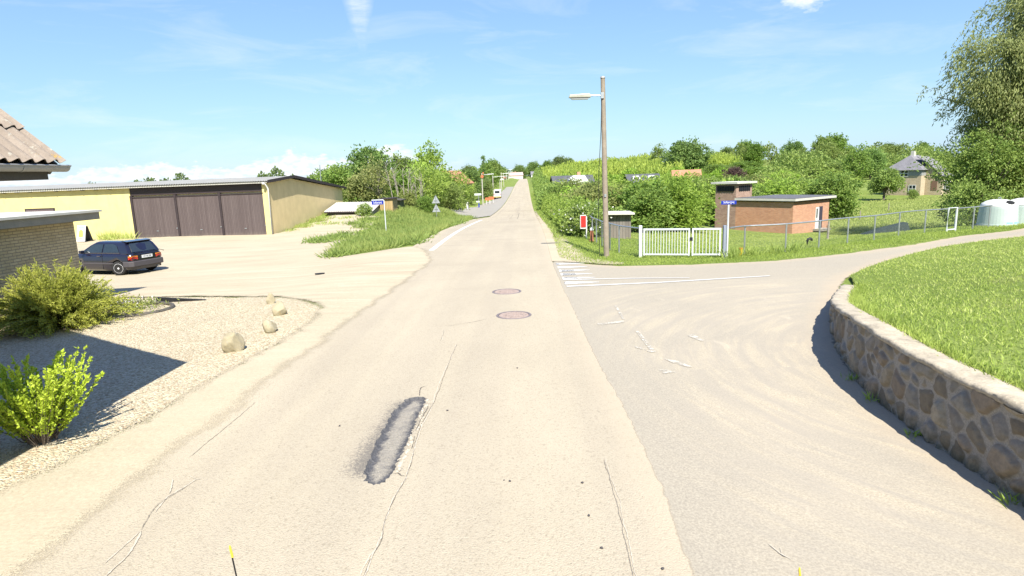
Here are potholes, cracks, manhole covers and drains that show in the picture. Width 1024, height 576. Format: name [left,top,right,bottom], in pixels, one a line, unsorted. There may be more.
crack [359,320,480,576]
crack [105,476,196,576]
crack [604,459,637,576]
manhole cover [496,311,532,319]
pothole [363,397,426,485]
